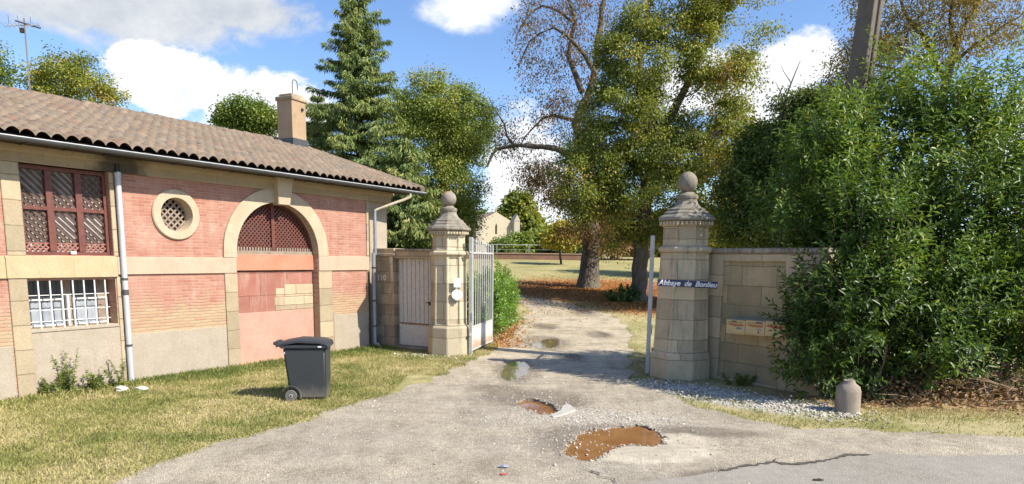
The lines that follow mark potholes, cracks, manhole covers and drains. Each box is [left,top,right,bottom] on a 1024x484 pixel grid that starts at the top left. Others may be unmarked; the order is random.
pothole [563,353,585,361]
pothole [510,397,562,415]
crack [719,453,873,471]
pothole [554,424,669,462]
pothole [527,337,562,349]
pothole [496,360,533,381]
